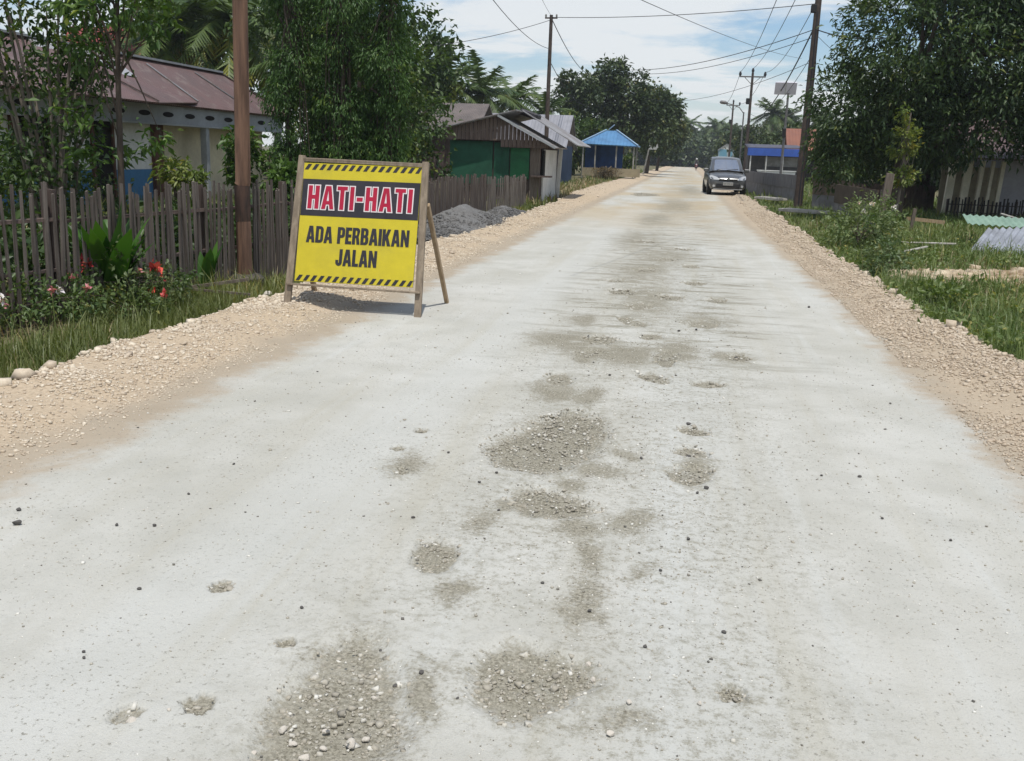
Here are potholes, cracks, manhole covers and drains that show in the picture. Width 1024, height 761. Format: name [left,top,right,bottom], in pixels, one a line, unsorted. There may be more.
pothole [627,331,676,343]
pothole [531,369,587,389]
pothole [656,442,726,462]
pothole [567,332,631,348]
pothole [438,625,628,742]
pothole [391,530,477,582]
pothole [84,693,164,737]
pothole [639,348,693,371]
pothole [559,347,621,360]
pothole [377,463,424,480]
pothole [694,674,769,715]
pothole [190,573,253,601]
